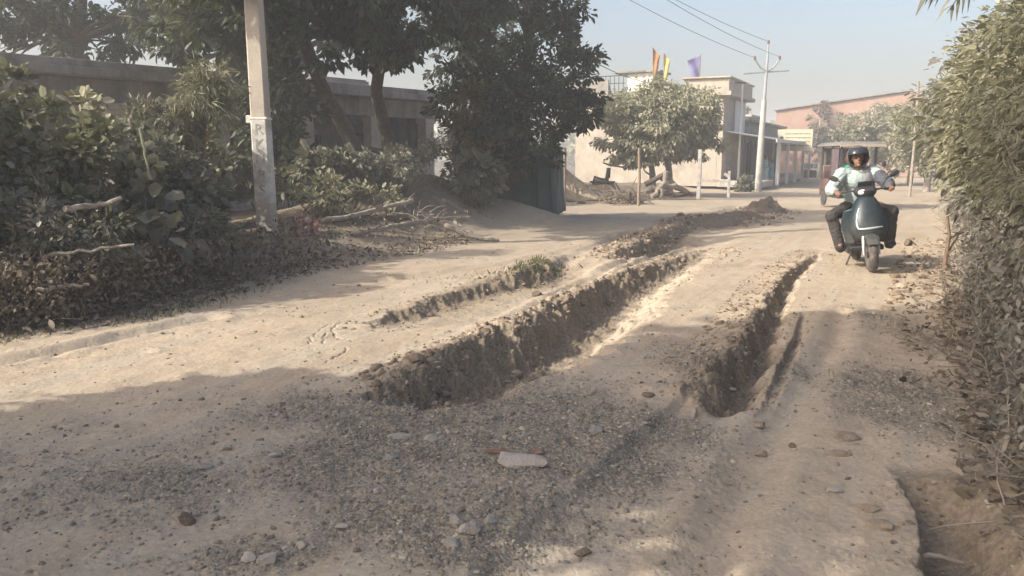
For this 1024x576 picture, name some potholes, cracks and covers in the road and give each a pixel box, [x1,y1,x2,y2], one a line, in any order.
pothole [688,254,823,421]
pothole [362,250,725,414]
pothole [606,217,744,263]
